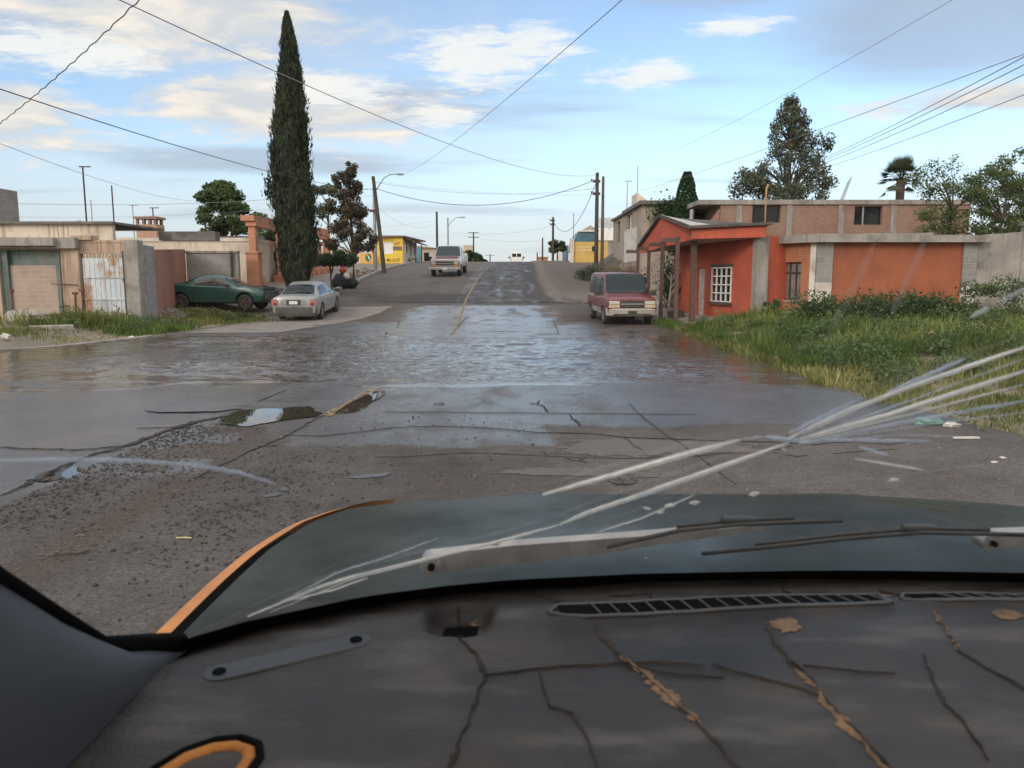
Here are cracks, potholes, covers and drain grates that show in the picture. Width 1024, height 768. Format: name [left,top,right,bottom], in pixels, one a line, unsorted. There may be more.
crack [2,445,128,453]
crack [186,403,918,486]
